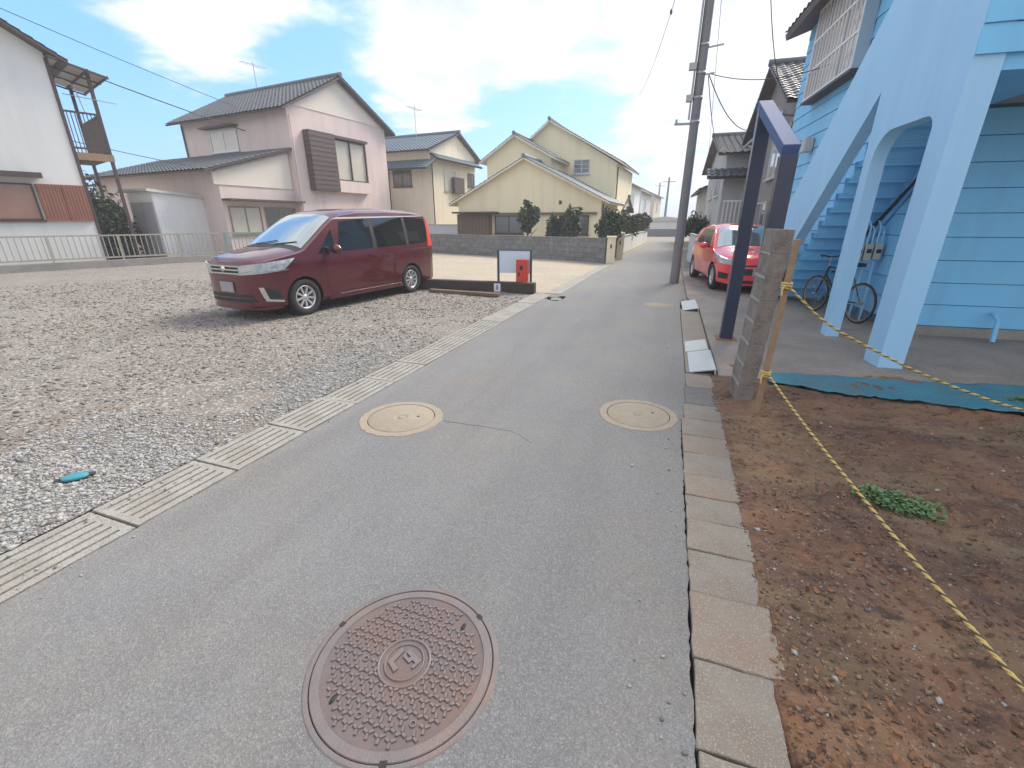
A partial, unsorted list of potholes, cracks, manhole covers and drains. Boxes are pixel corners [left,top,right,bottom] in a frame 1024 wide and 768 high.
manhole cover [599,399,679,432]
manhole cover [301,587,499,768]
manhole cover [358,402,443,437]
